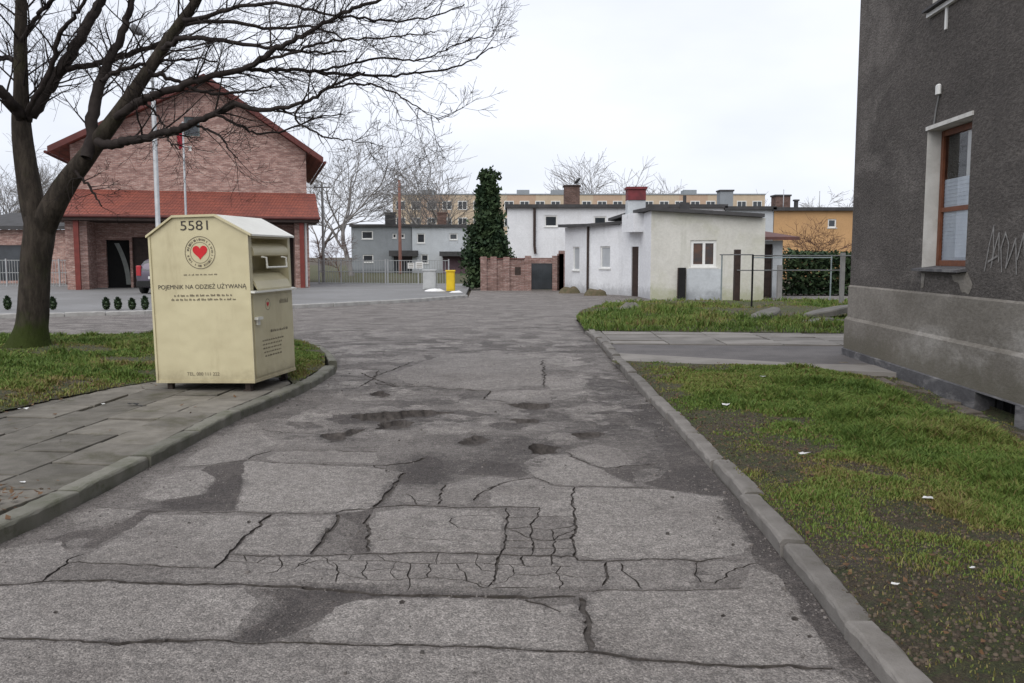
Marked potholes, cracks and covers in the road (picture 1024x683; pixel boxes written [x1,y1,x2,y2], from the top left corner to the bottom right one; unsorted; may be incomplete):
pothole [458,435,491,446]
crack [361,362,503,402]
pothole [528,442,561,455]
pothole [349,410,455,422]
pothole [320,429,365,442]
crack [448,349,572,387]
crack [0,477,756,612]
pothole [375,420,415,429]
pothole [571,432,606,440]
